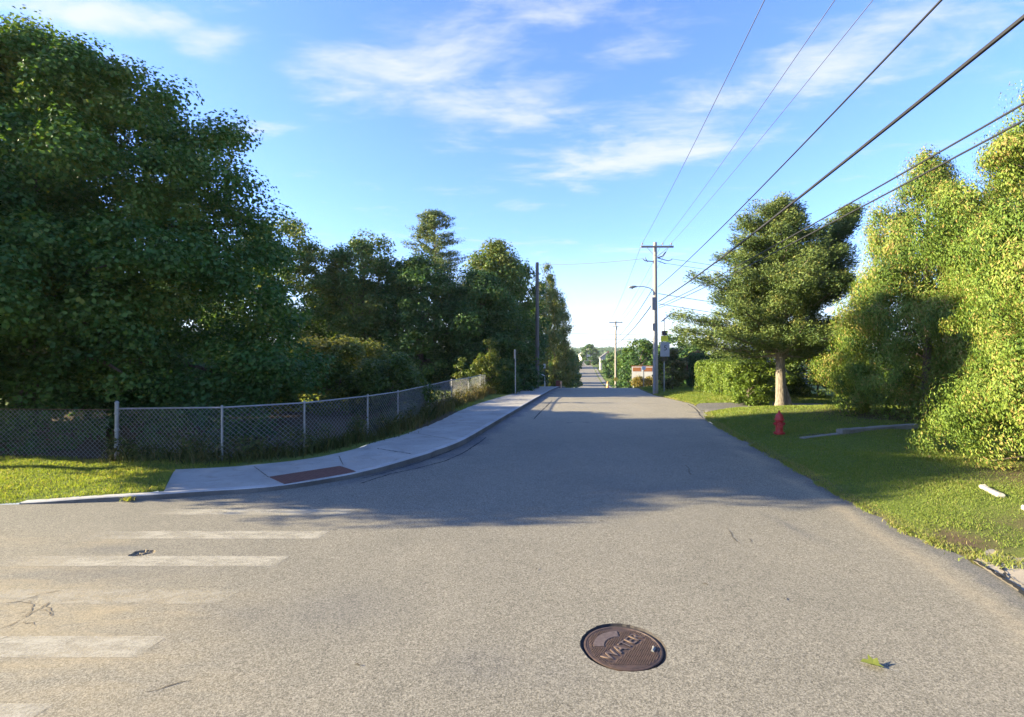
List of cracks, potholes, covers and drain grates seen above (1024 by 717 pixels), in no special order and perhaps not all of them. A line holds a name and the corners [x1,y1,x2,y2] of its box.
crack [7,591,54,637]
manhole cover [580,623,667,672]
